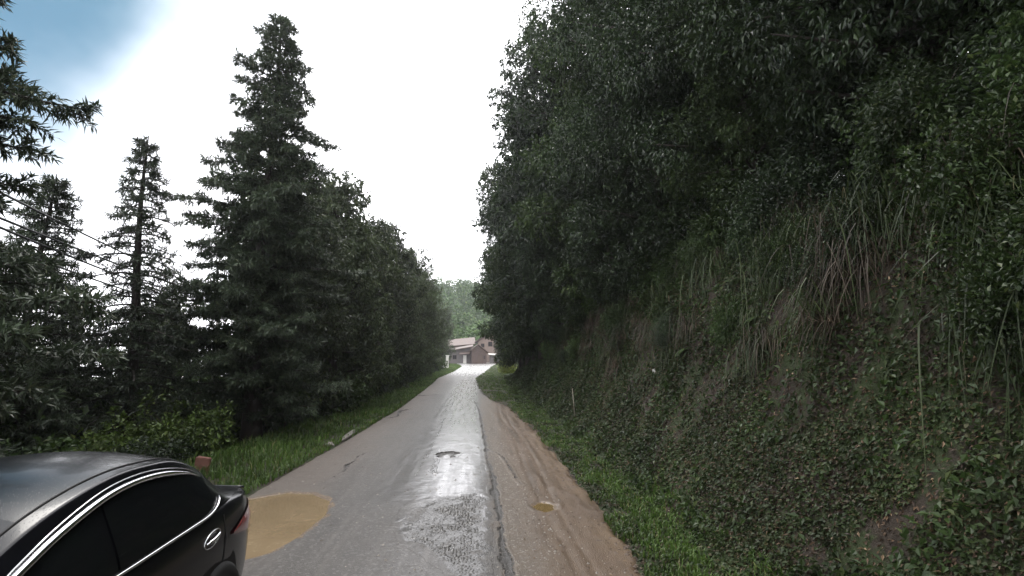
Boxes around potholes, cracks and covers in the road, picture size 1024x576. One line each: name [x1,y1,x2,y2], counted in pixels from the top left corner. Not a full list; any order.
crack [381,394,441,419]
pothole [429,451,464,459]
crack [329,452,369,478]
pothole [525,500,565,514]
